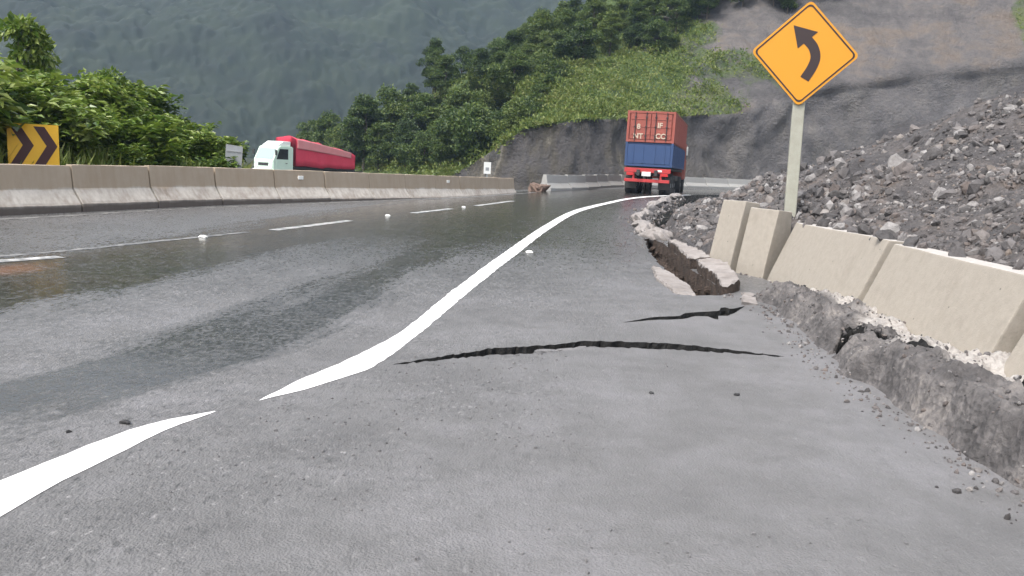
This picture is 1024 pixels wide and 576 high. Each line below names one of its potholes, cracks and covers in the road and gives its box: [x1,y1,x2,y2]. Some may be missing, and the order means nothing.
crack [393,341,784,365]
crack [627,306,744,322]
